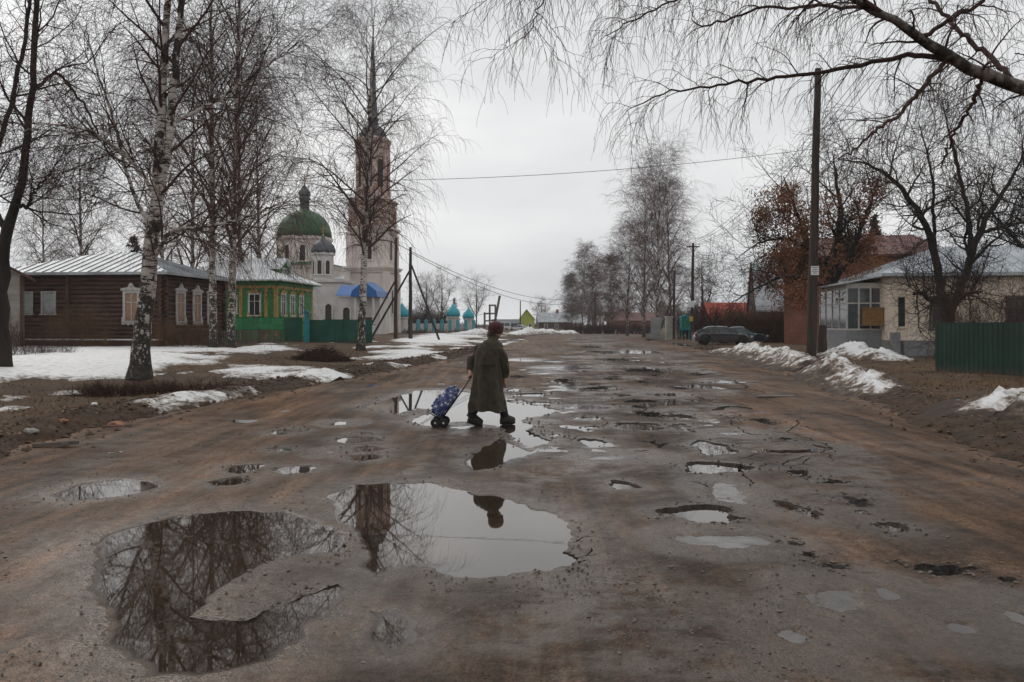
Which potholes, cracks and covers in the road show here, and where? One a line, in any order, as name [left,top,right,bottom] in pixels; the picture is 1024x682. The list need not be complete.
pothole [360,389,561,447]
pothole [873,522,910,532]
pothole [207,476,254,486]
pothole [224,463,268,474]
pothole [655,504,747,523]
pothole [773,500,798,510]
pothole [48,478,162,501]
crack [738,416,834,487]
pothole [684,461,755,474]
pothole [913,564,984,576]
pothole [690,440,739,456]
pothole [794,505,825,520]
